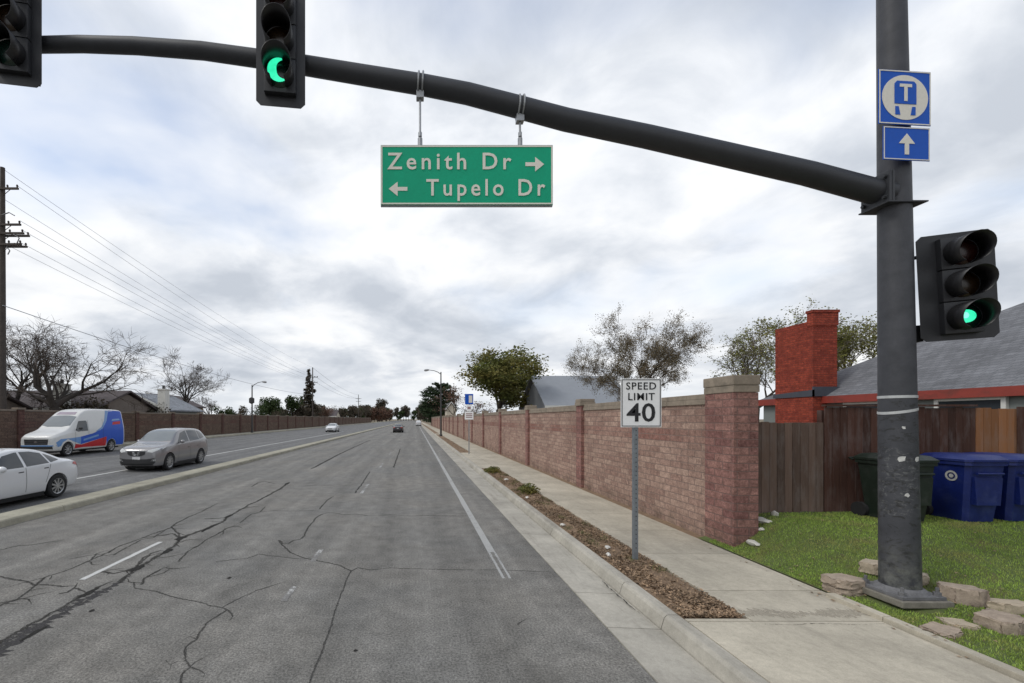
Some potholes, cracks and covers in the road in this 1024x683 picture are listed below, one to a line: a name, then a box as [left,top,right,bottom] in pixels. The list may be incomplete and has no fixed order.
crack [0,440,543,683]
